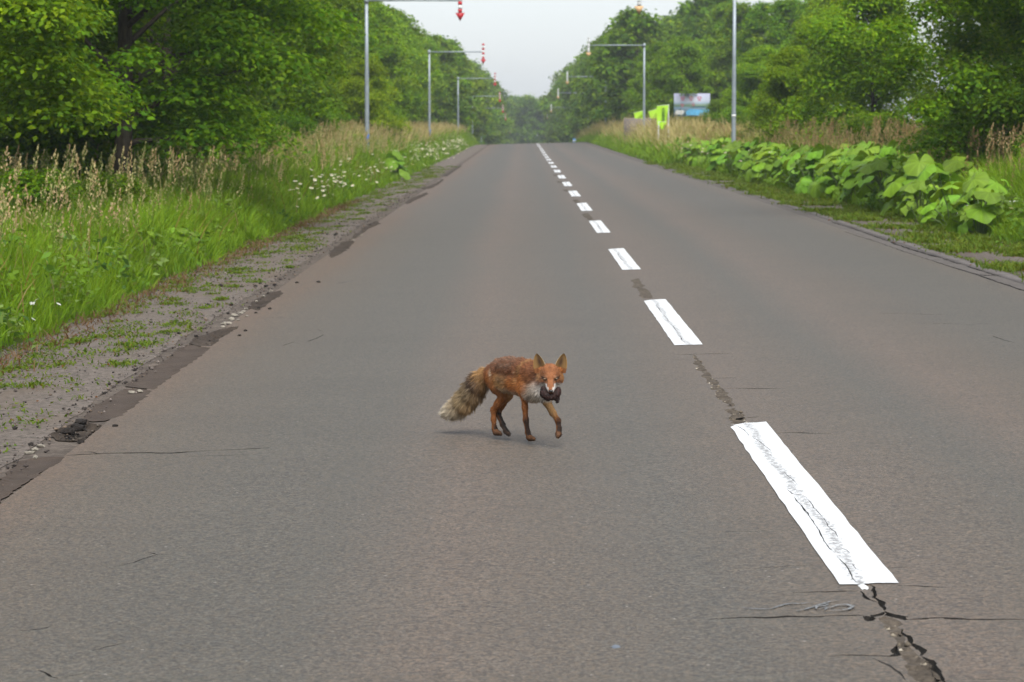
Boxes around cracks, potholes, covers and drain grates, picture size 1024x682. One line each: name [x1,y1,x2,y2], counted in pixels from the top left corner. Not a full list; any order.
pothole [48,421,101,442]
crack [65,447,268,456]
